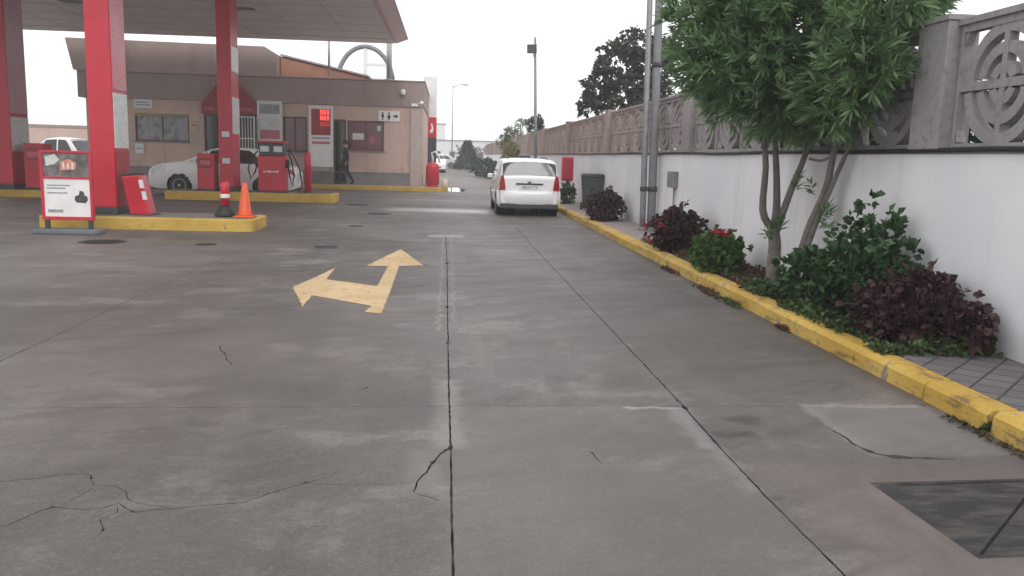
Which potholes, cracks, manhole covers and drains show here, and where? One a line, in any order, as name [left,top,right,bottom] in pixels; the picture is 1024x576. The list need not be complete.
crack [827,427,949,460]
crack [413,448,449,501]
crack [0,471,383,536]
